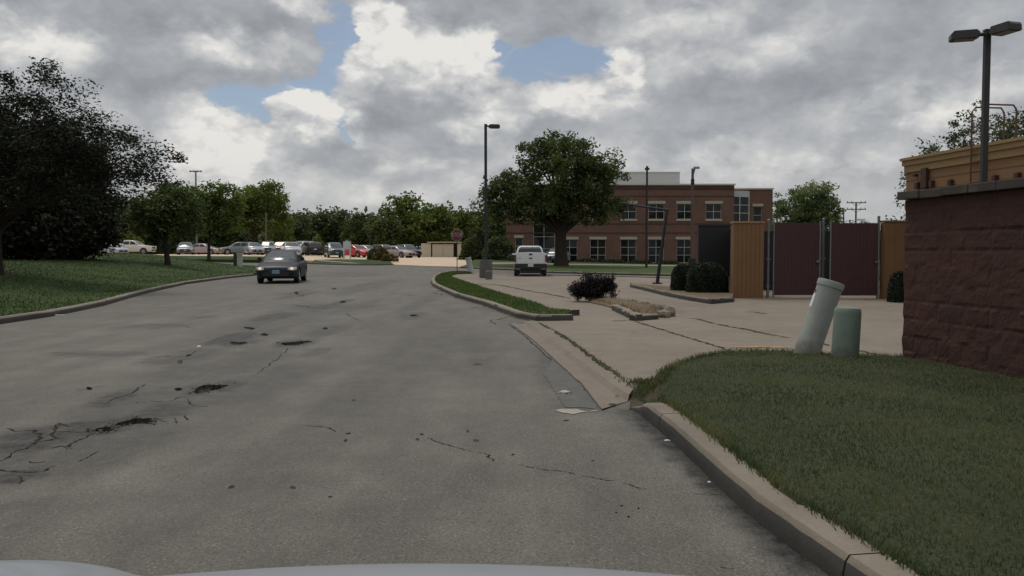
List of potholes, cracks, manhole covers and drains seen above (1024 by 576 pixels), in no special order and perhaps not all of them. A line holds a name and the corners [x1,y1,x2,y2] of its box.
crack [519,464,641,489]
crack [429,438,495,461]
pothole [189,383,235,394]
crack [0,423,98,484]
pothole [108,415,157,427]
crack [107,385,208,423]
